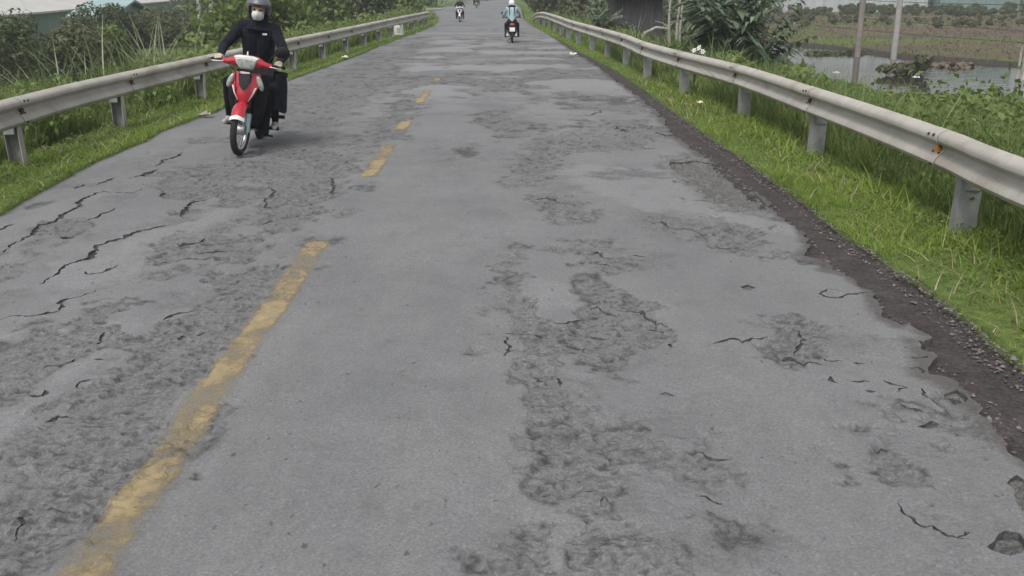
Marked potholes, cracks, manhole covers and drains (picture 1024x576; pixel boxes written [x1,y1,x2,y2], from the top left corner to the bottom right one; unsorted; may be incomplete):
pothole [987,531,1024,556]
crack [263,178,336,225]
crack [897,502,976,542]
crack [819,289,869,299]
crack [503,306,667,356]
crack [0,153,230,320]
crack [686,452,733,462]
crack [660,221,732,250]
crack [713,330,938,412]
crack [577,251,613,266]
